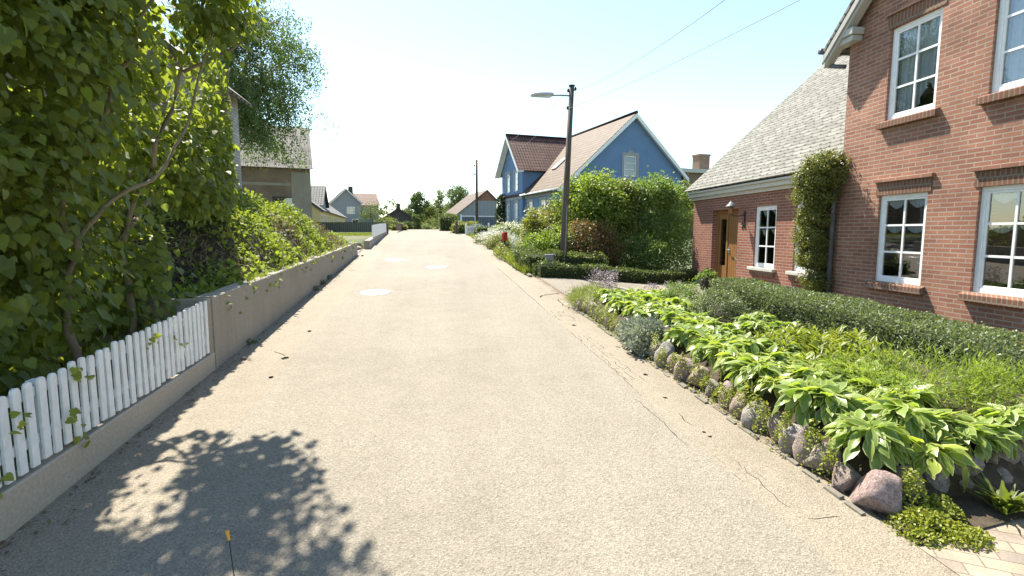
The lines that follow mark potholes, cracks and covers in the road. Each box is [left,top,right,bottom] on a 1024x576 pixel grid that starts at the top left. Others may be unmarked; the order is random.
crack [540,293,631,379]
